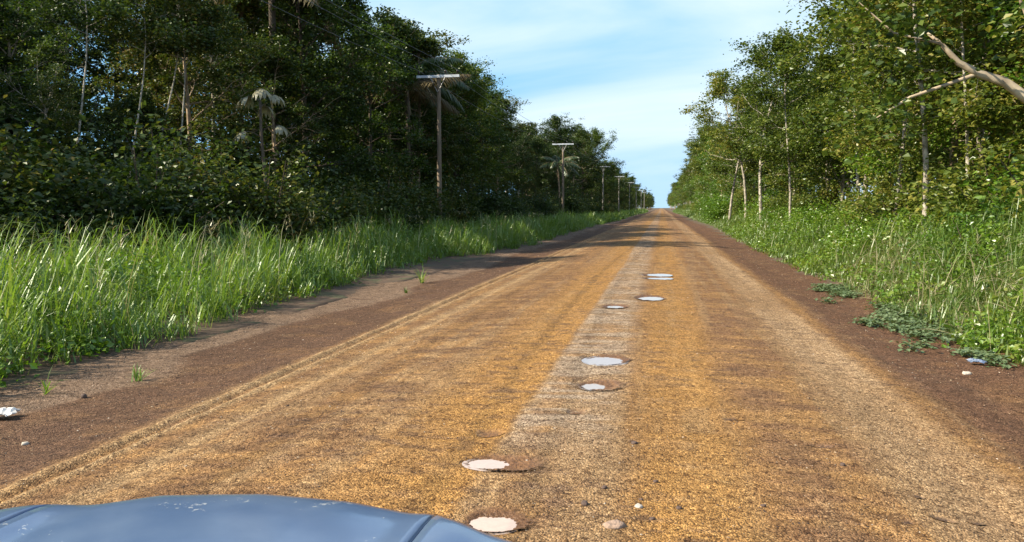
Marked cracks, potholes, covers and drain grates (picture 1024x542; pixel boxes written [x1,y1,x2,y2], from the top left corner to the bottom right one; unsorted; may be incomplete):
pothole [582,354,631,366]
pothole [462,453,547,471]
pothole [458,506,535,535]
pothole [574,379,626,391]
